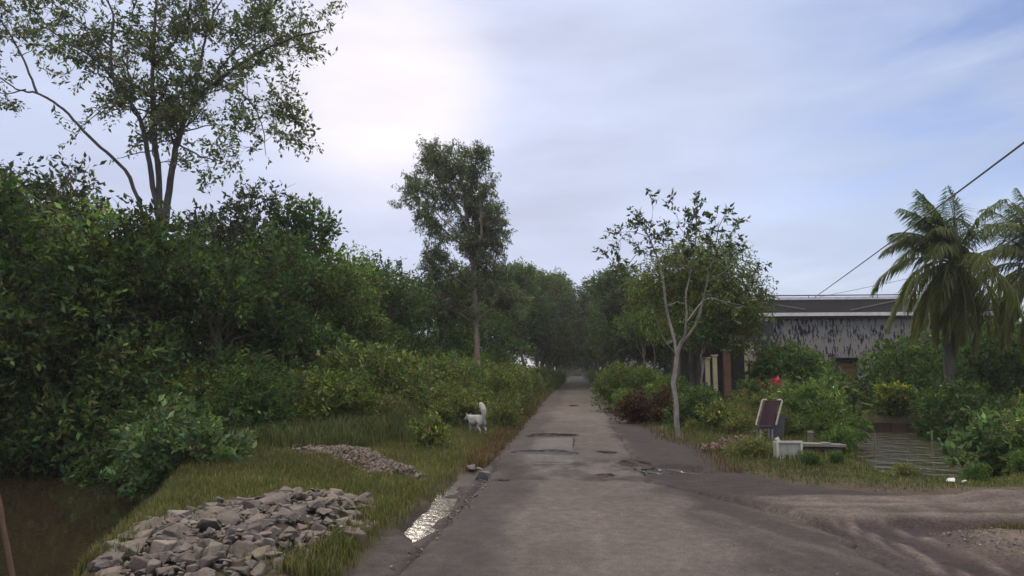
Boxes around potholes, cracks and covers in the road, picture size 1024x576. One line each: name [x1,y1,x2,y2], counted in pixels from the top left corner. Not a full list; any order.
pothole [614,459,654,469]
